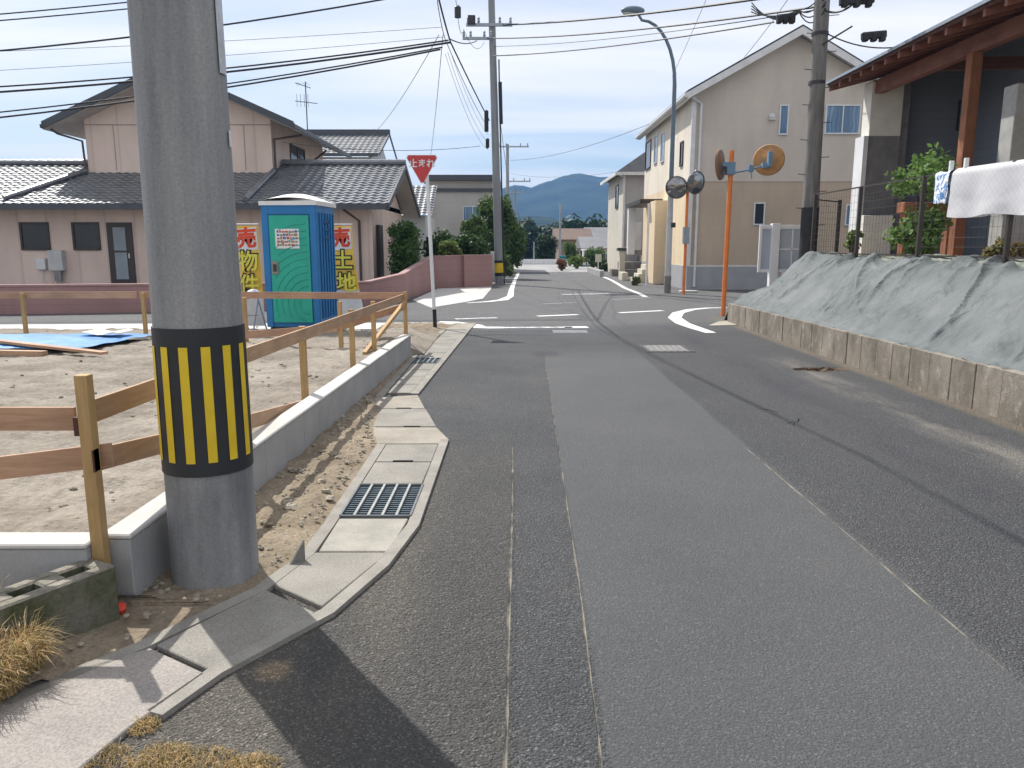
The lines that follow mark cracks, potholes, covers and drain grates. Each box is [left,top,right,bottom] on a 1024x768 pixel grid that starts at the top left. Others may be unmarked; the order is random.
manhole cover [638,344,695,352]
drain grate [339,483,424,520]
